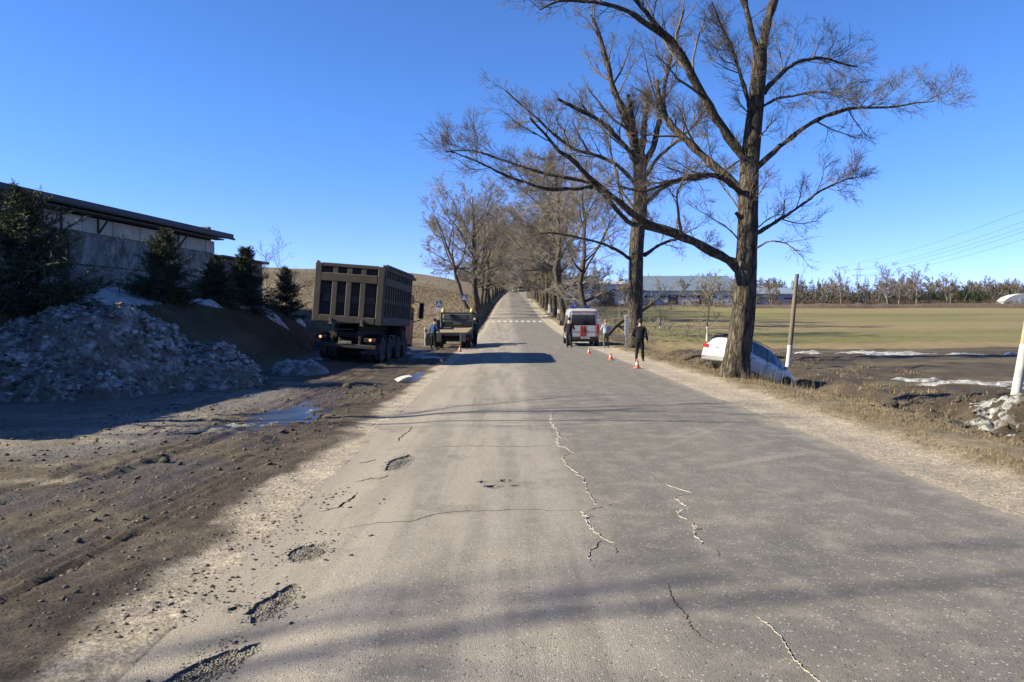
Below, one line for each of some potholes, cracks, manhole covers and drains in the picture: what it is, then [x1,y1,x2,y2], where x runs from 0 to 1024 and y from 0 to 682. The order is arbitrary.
pothole [385,454,413,471]
crack [319,459,388,512]
pothole [287,544,328,562]
crack [669,588,720,647]
pothole [162,642,262,682]
crack [757,617,821,682]
crack [344,412,618,561]
crack [653,476,721,556]
pothole [244,583,298,624]
